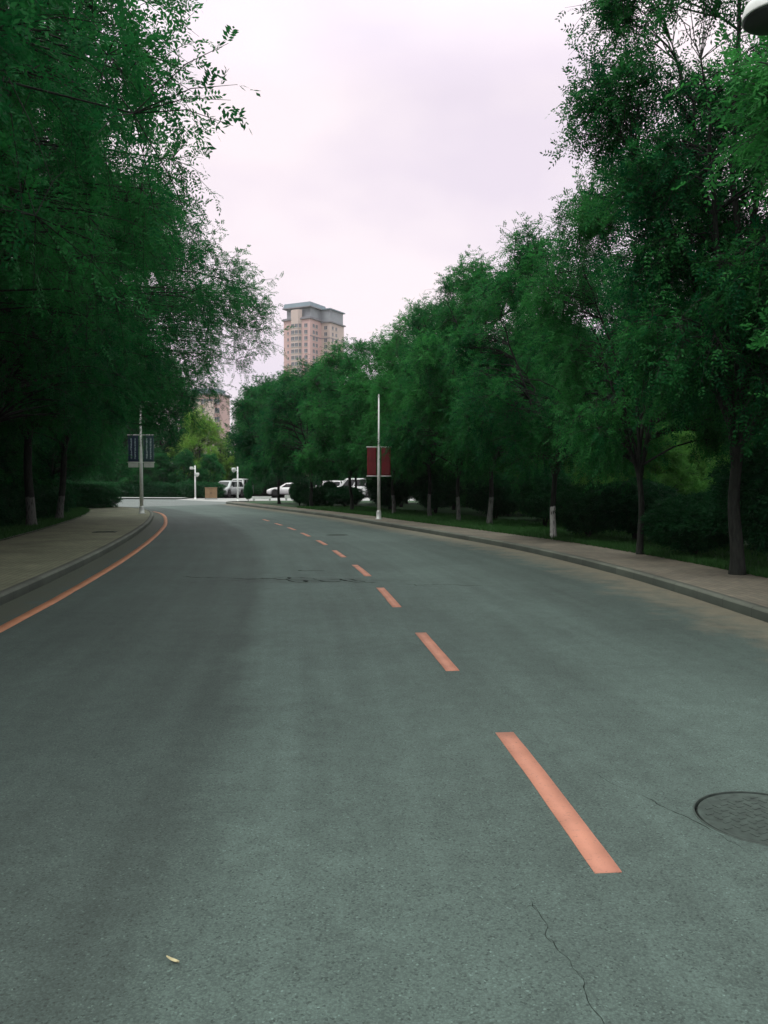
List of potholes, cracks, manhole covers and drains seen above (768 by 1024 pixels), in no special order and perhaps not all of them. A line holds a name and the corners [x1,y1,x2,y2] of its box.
crack [182,570,371,583]
manhole cover [693,791,768,847]
crack [530,903,604,1024]
crack [597,774,739,846]
